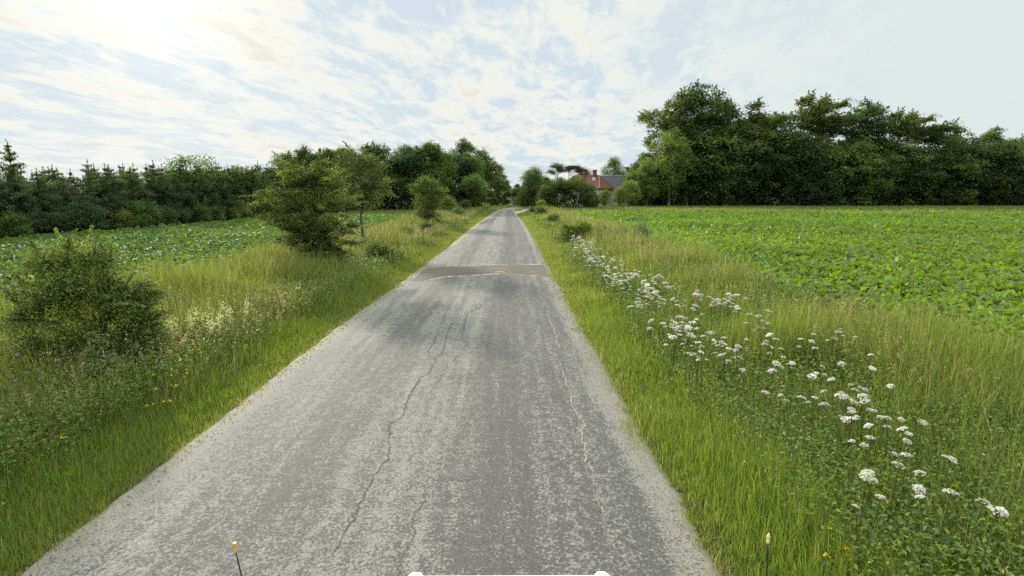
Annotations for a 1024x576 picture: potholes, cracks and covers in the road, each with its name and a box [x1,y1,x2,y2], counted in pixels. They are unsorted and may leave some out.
crack [396,480,428,576]
crack [533,315,606,517]
crack [332,304,483,557]
